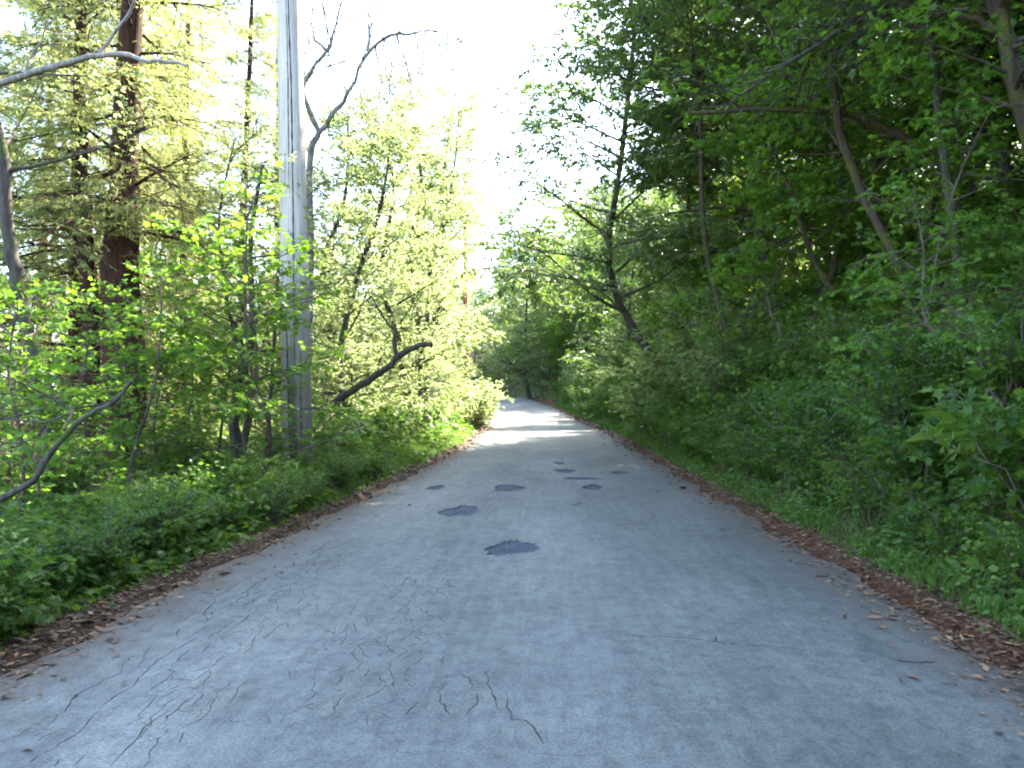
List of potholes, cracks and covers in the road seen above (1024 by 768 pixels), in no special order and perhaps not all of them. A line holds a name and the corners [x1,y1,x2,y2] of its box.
crack [862,635,936,663]
crack [230,553,480,725]
crack [2,542,369,767]
crack [606,633,805,650]
crack [437,670,777,765]
